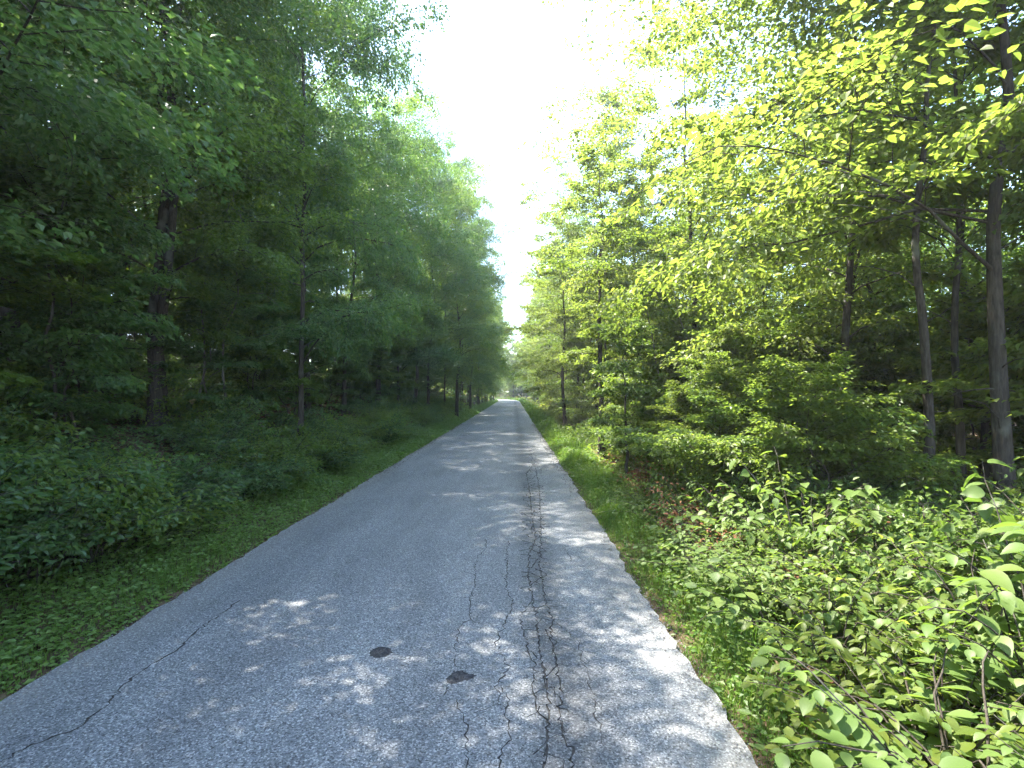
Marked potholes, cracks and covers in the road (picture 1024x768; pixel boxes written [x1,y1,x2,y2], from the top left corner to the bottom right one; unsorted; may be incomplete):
pothole [370,646,393,658]
pothole [446,670,477,684]
crack [443,447,603,768]
crack [2,600,240,761]
